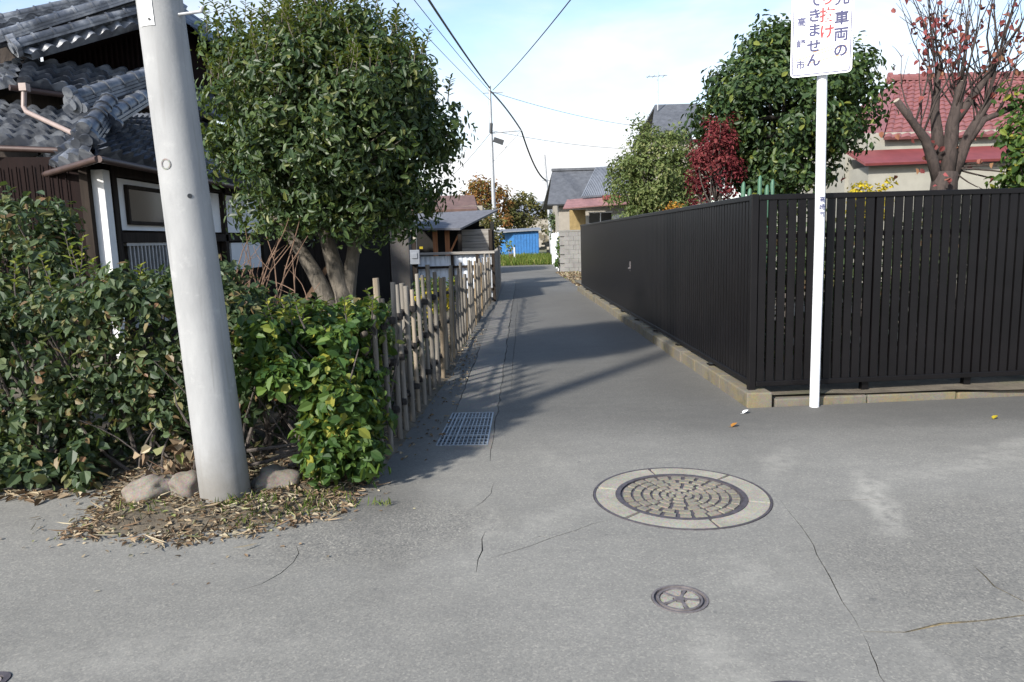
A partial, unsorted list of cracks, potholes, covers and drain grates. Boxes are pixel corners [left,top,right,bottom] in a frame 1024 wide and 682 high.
drain grate [436,412,494,446]
manhole cover [593,467,773,530]
utility cover [651,585,709,613]
crack [906,570,1024,633]
